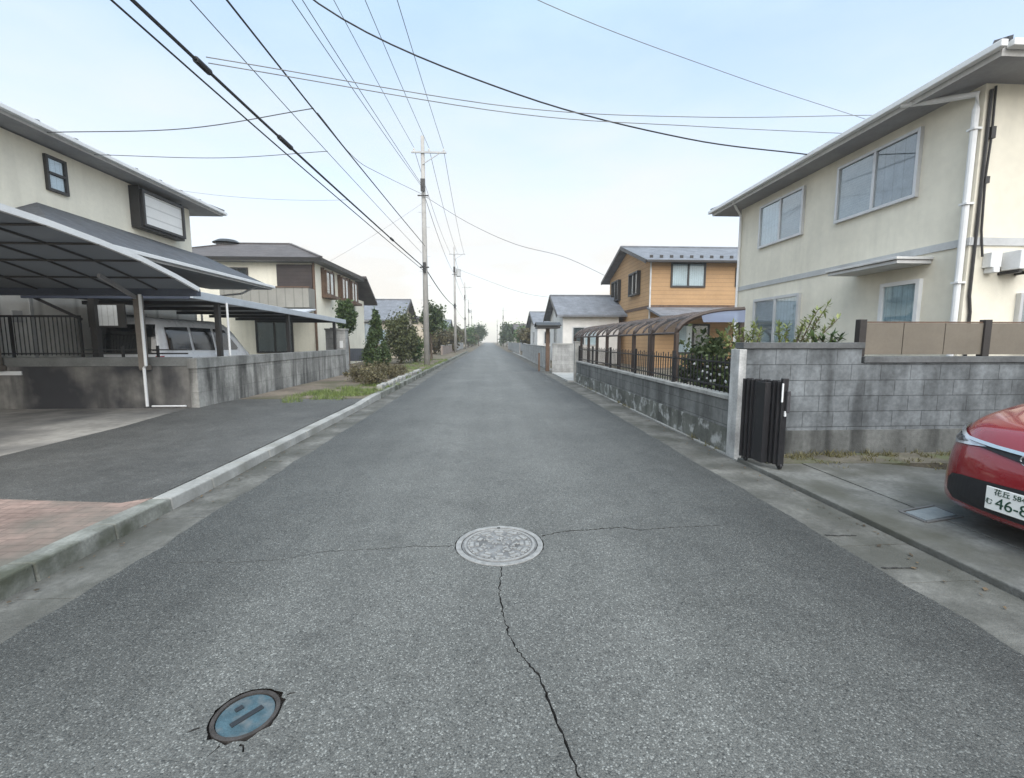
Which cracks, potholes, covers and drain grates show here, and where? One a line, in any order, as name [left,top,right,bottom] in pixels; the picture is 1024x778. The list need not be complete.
crack [158,545,452,564]
crack [498,567,581,778]
manhole cover [455,526,544,567]
crack [542,525,717,536]
utility cover [206,690,286,747]
